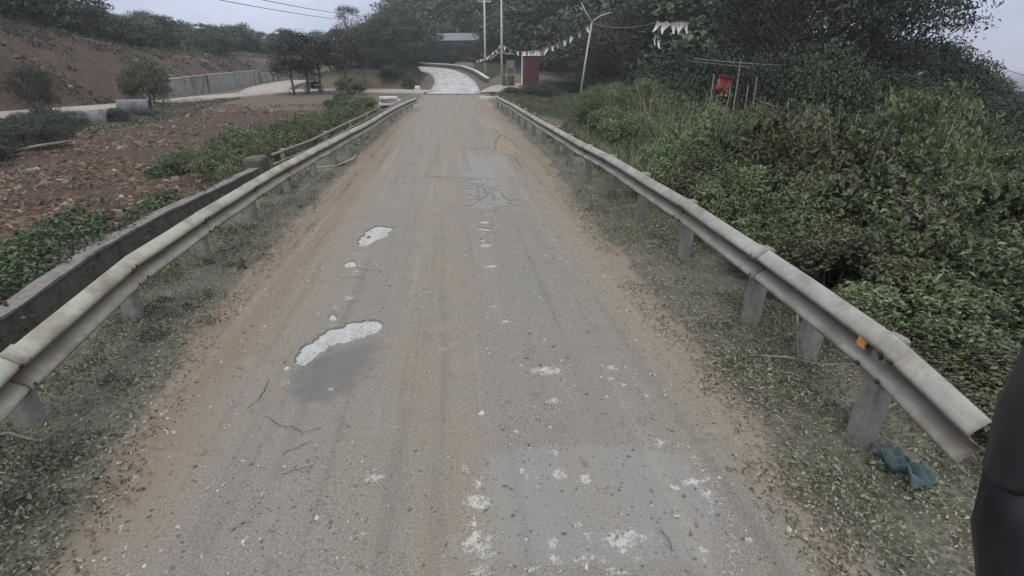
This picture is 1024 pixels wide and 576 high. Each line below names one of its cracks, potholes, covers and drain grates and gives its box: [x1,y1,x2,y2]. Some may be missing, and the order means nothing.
pothole [352,225,400,249]
crack [250,379,322,475]
crack [392,155,524,211]
pothole [285,317,390,371]
